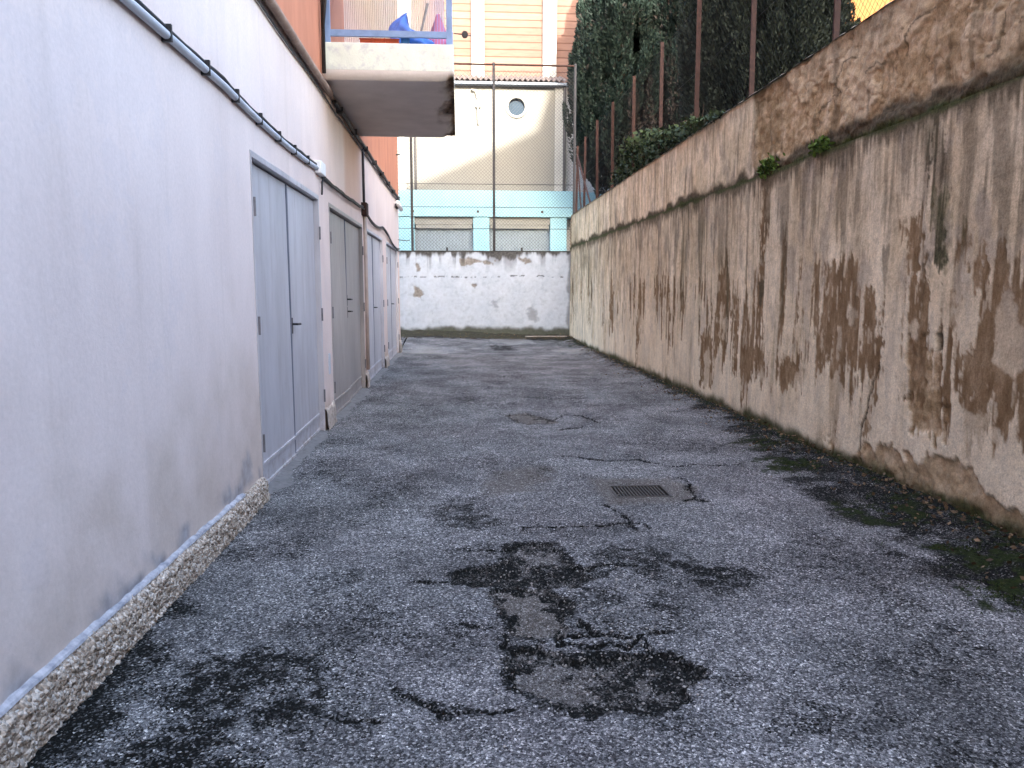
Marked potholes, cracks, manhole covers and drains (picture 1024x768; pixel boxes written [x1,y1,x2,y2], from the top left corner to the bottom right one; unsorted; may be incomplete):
crack [577,513,639,531]
drain grate [608,485,673,498]
